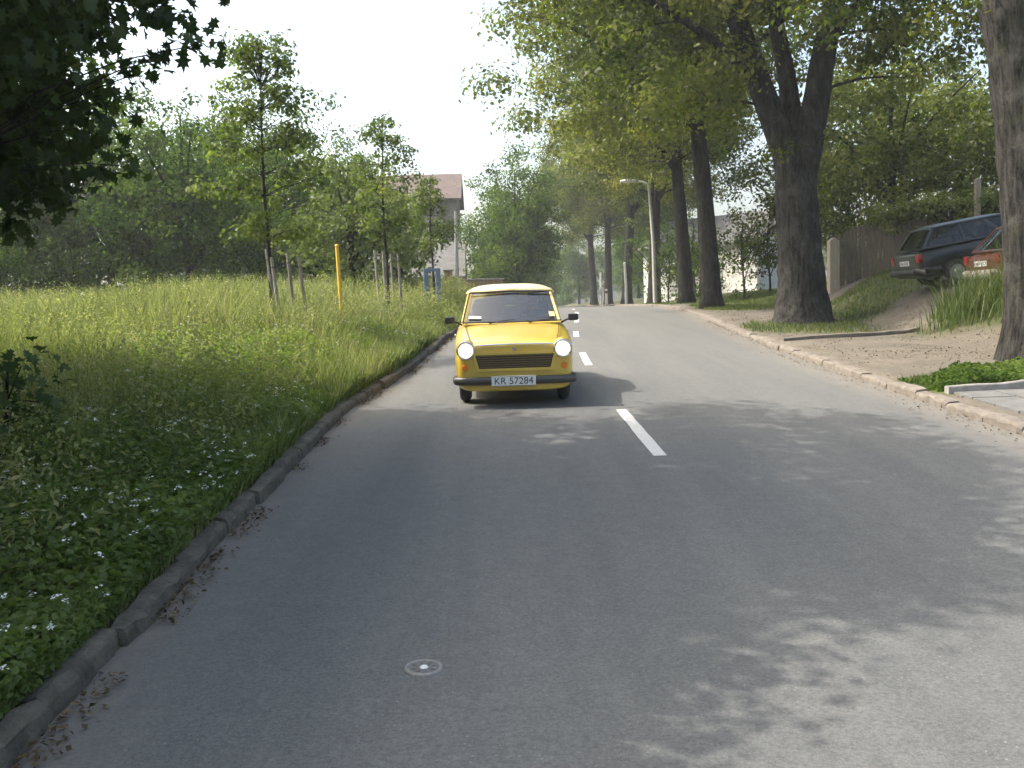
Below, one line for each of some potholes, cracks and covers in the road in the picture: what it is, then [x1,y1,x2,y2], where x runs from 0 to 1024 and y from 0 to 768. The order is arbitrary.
manhole cover [404,659,444,677]
